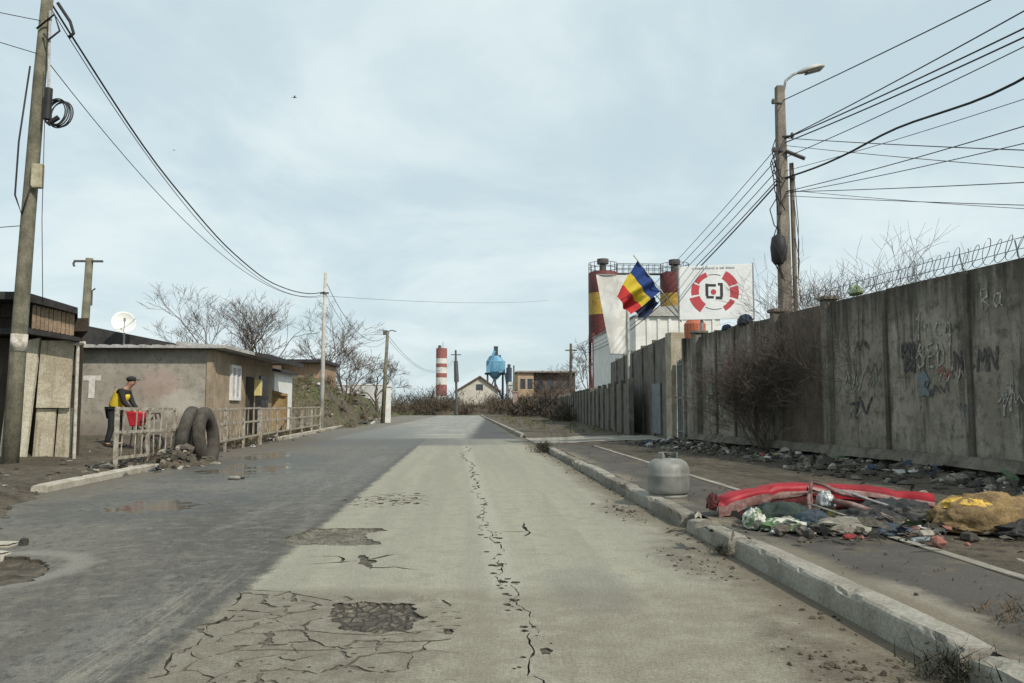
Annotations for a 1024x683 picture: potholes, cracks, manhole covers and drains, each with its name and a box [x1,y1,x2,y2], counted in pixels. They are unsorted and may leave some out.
pothole [0,556,50,586]
pothole [358,555,377,569]
pothole [282,528,387,546]
crack [460,447,552,683]
crack [148,589,461,683]
pothole [328,601,428,635]
